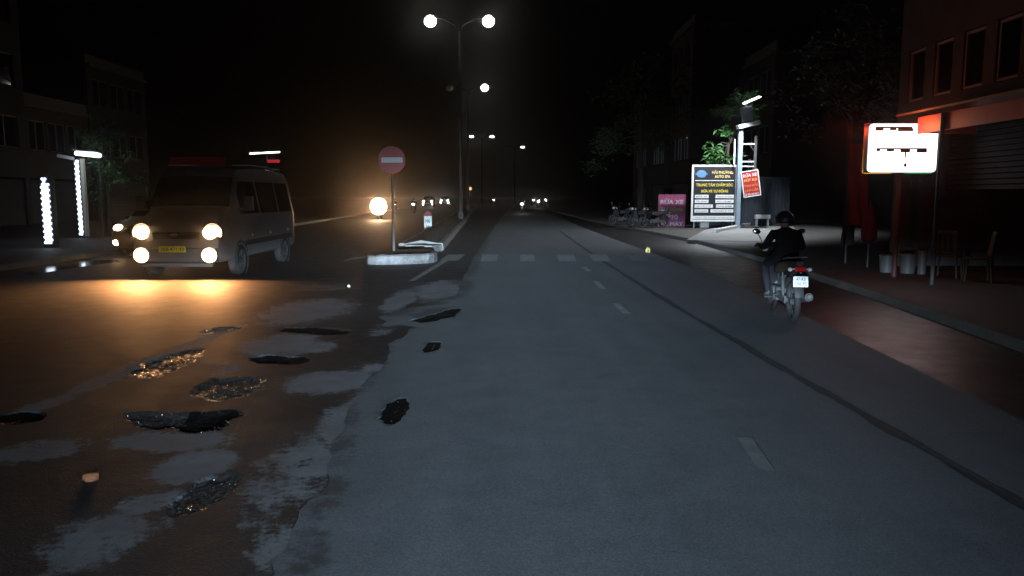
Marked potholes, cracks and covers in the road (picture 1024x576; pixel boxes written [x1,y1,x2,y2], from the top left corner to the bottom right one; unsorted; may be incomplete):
pothole [122,347,210,381]
pothole [120,409,248,434]
pothole [377,397,411,426]
pothole [407,308,463,323]
pothole [0,411,48,425]
pothole [165,471,248,518]
pothole [275,327,354,335]
pothole [197,326,244,334]
pothole [187,375,269,403]
pothole [422,341,442,353]
pothole [245,354,312,365]
